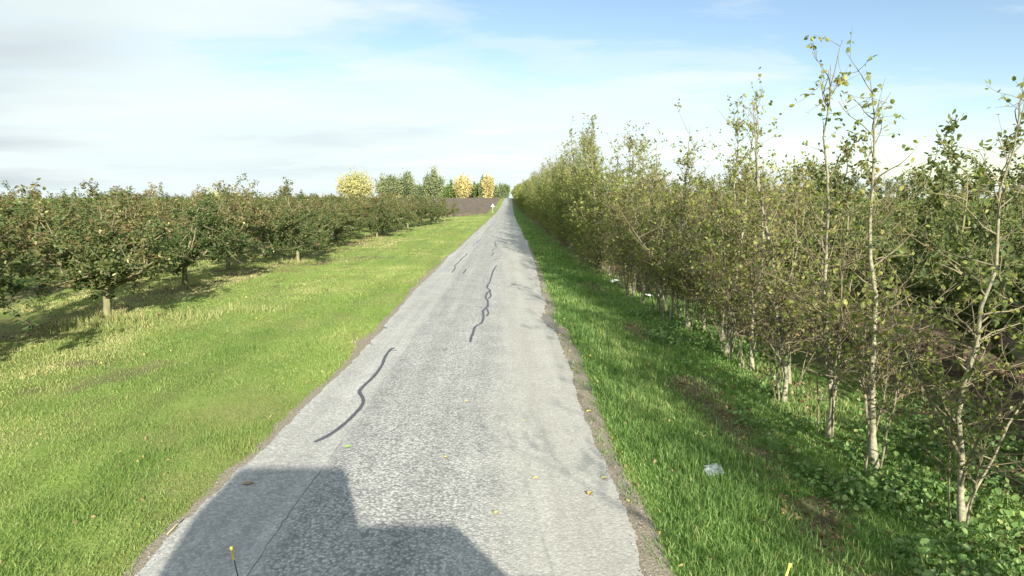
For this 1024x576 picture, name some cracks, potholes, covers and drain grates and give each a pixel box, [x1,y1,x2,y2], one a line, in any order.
crack [246,339,413,576]
